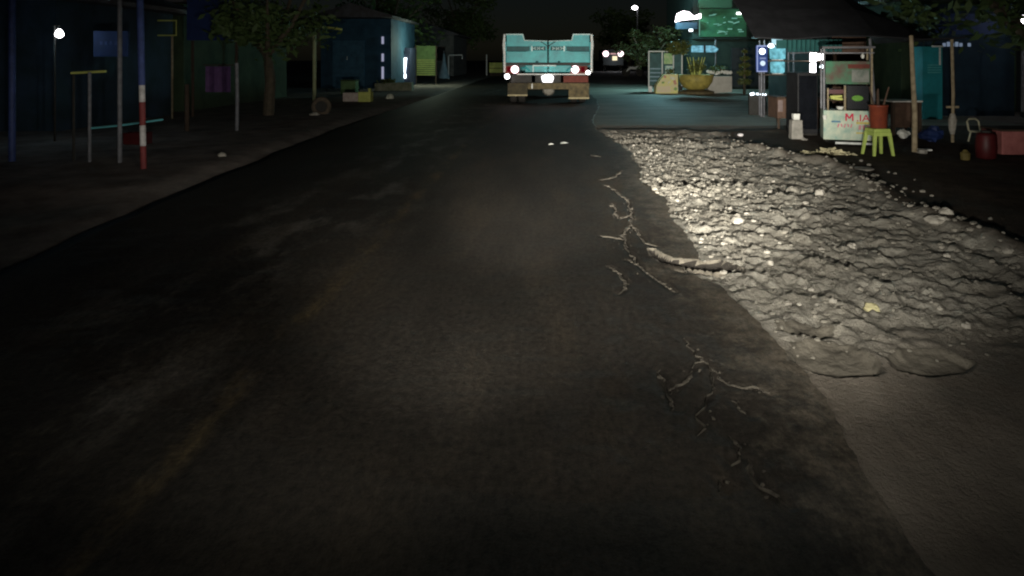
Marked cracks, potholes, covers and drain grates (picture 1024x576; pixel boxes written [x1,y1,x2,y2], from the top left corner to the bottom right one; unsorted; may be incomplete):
pothole [774,319,835,340]
crack [656,338,787,506]
crack [591,155,686,294]
pothole [884,347,978,378]
pothole [785,338,887,379]
